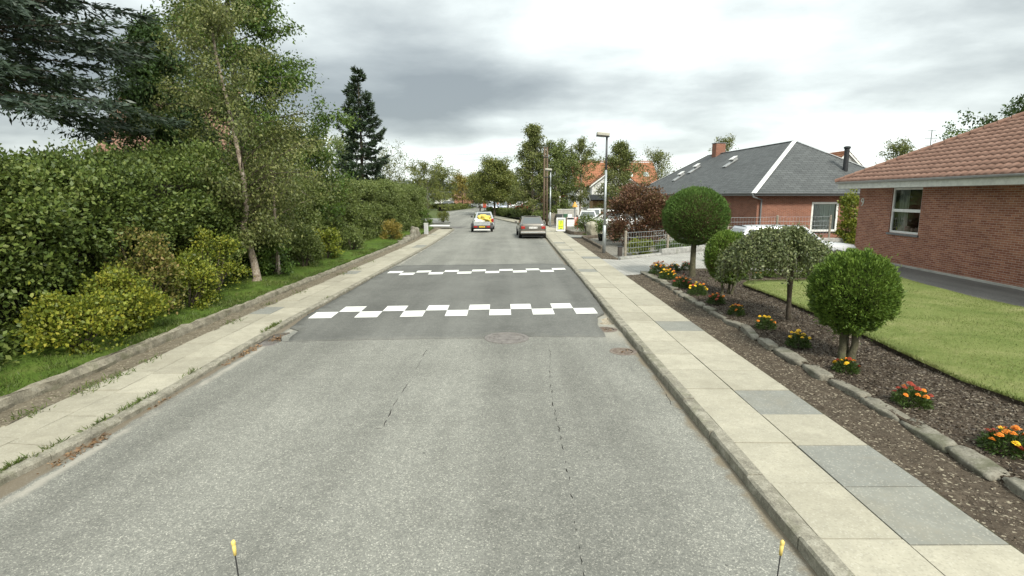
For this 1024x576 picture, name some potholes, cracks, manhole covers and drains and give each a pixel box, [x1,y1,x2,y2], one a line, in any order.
manhole cover [485,332,529,344]
crack [549,351,585,576]
